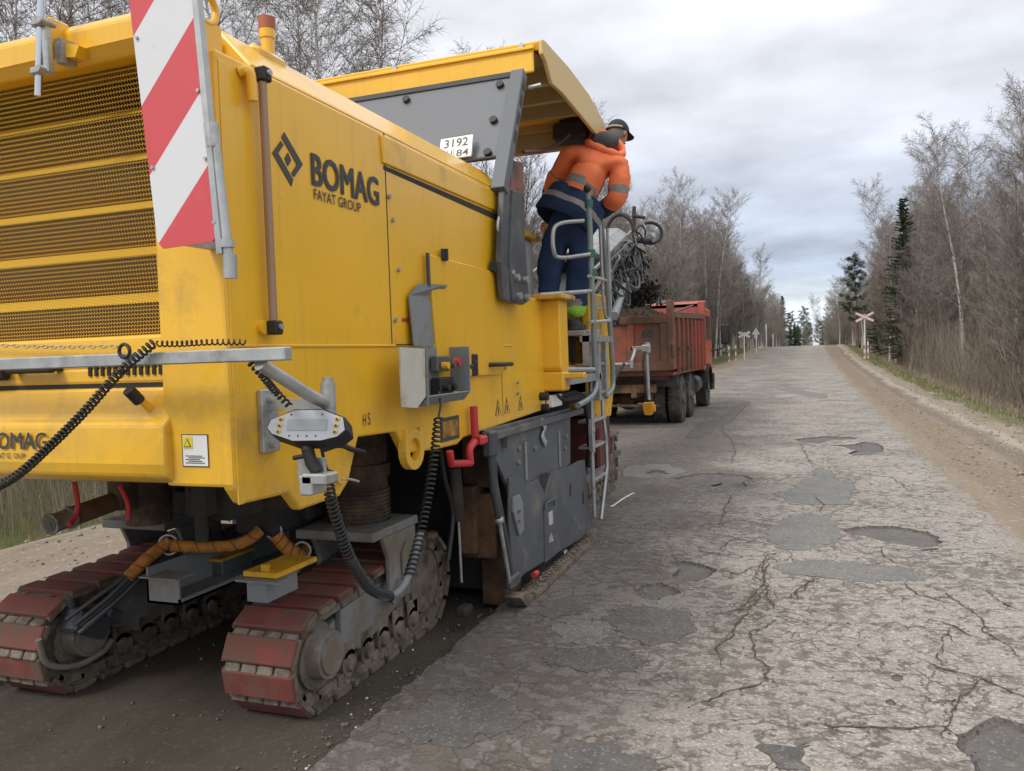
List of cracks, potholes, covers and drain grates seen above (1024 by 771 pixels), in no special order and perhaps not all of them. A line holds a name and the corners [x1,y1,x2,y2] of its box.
pothole [832,441,884,456]
crack [678,430,898,707]
crack [806,583,1024,738]
pothole [669,560,718,582]
crack [875,545,940,563]
pothole [672,472,753,489]
pothole [843,526,943,548]
pothole [635,583,682,600]
